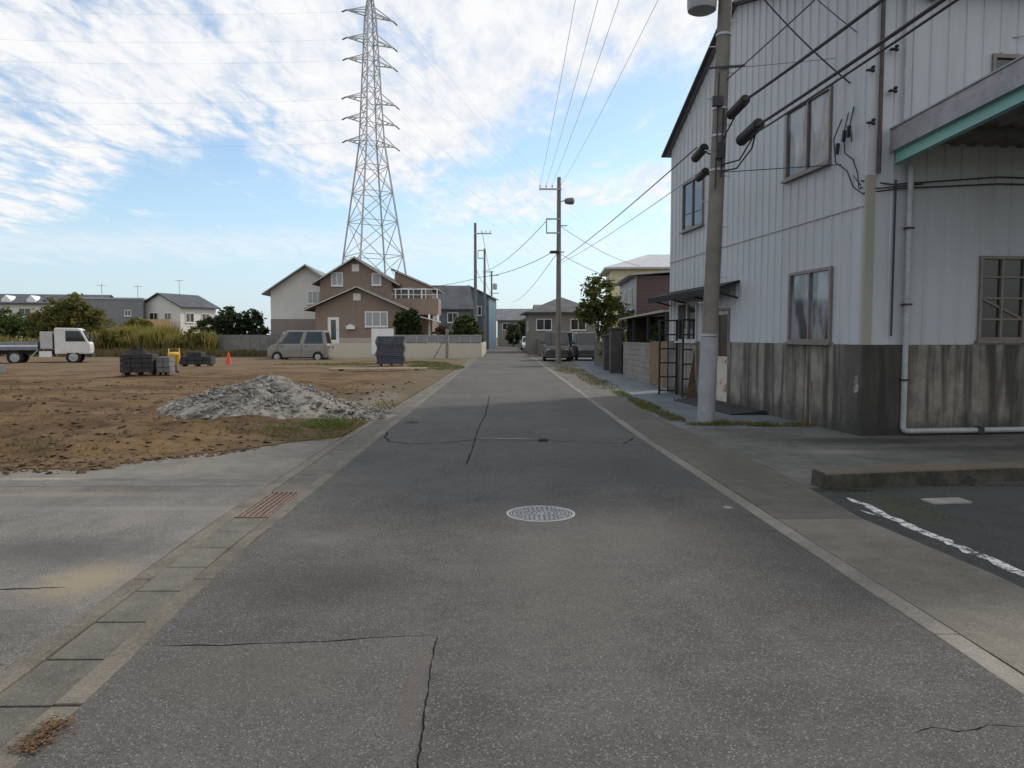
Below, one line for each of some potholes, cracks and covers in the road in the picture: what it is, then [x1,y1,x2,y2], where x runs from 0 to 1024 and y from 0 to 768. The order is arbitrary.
crack [384,397,633,464]
drain grate [235,492,300,518]
manhole cover [506,506,575,522]
